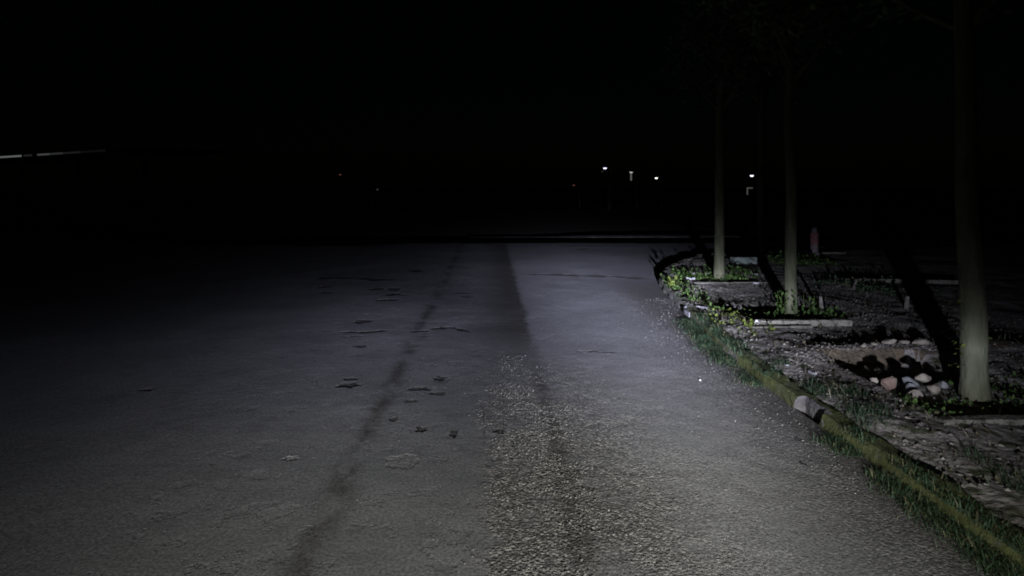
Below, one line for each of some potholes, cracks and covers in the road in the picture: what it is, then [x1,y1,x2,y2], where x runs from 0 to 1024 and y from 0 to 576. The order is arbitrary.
crack [339,329,390,337]
crack [411,326,471,337]
